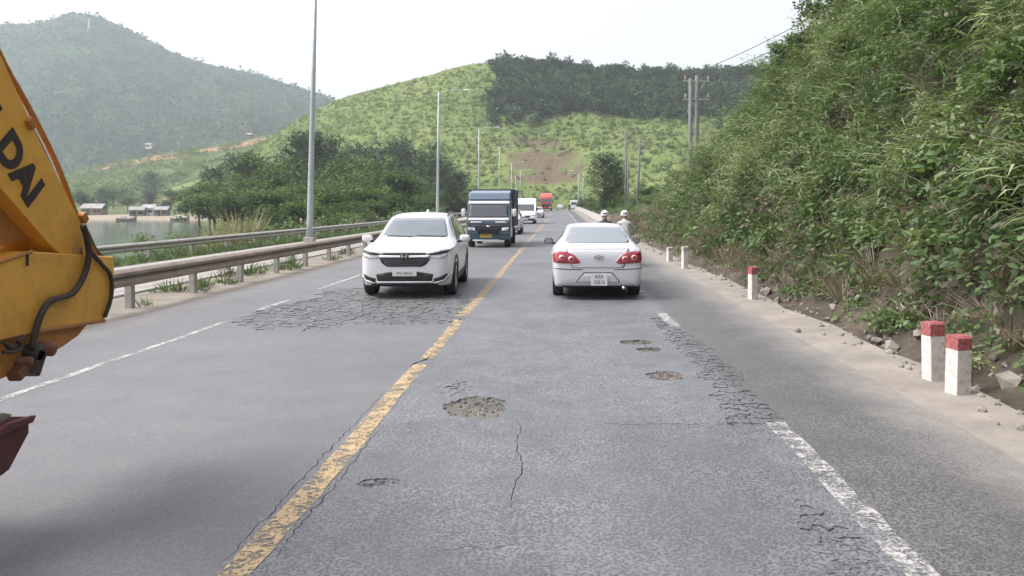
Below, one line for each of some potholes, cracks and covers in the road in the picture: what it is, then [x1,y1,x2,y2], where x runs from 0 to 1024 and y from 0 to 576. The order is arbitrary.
crack [503,418,523,525]
pothole [442,396,507,419]
crack [411,357,473,396]
pothole [645,371,683,381]
pothole [356,478,400,488]
crack [605,318,784,426]
crack [230,287,471,331]
crack [792,500,897,576]
